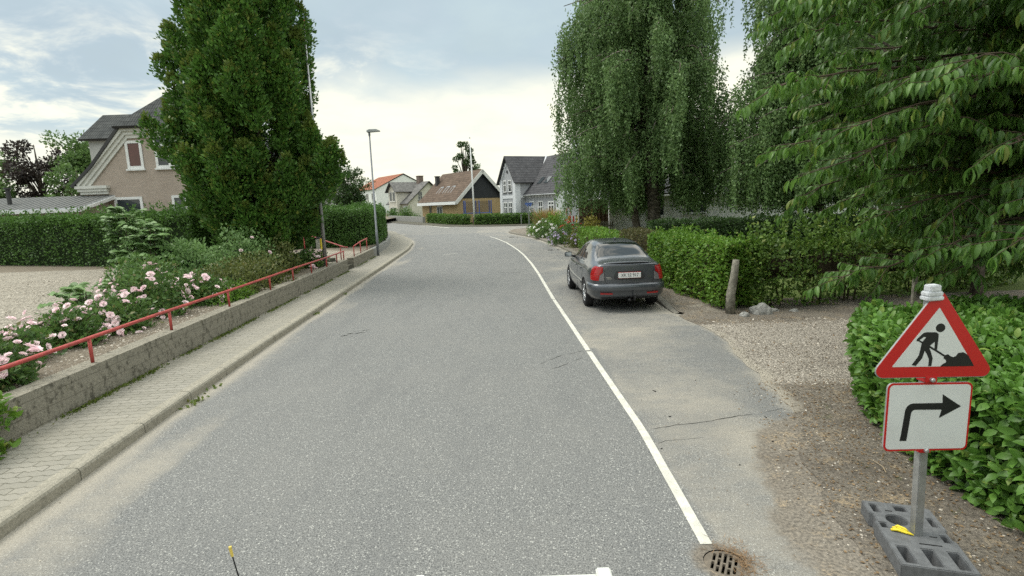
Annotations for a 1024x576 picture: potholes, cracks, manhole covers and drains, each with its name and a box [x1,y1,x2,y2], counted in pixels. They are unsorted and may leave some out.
crack [654,408,782,444]
drain grate [703,550,746,576]
